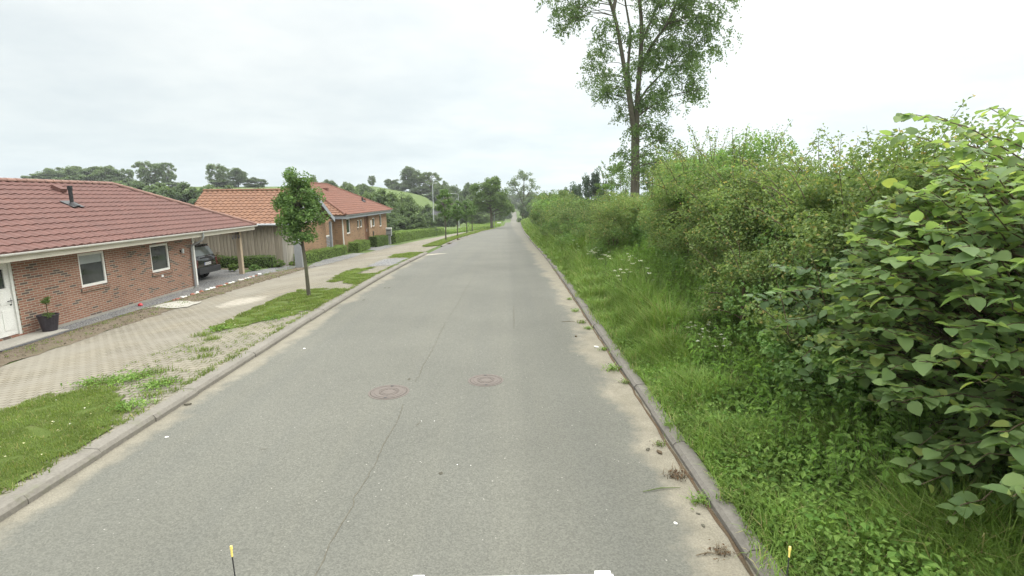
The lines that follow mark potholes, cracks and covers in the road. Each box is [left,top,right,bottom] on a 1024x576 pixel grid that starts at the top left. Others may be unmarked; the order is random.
manhole cover [368,385,409,400]
manhole cover [468,374,503,387]
crack [314,405,420,576]
